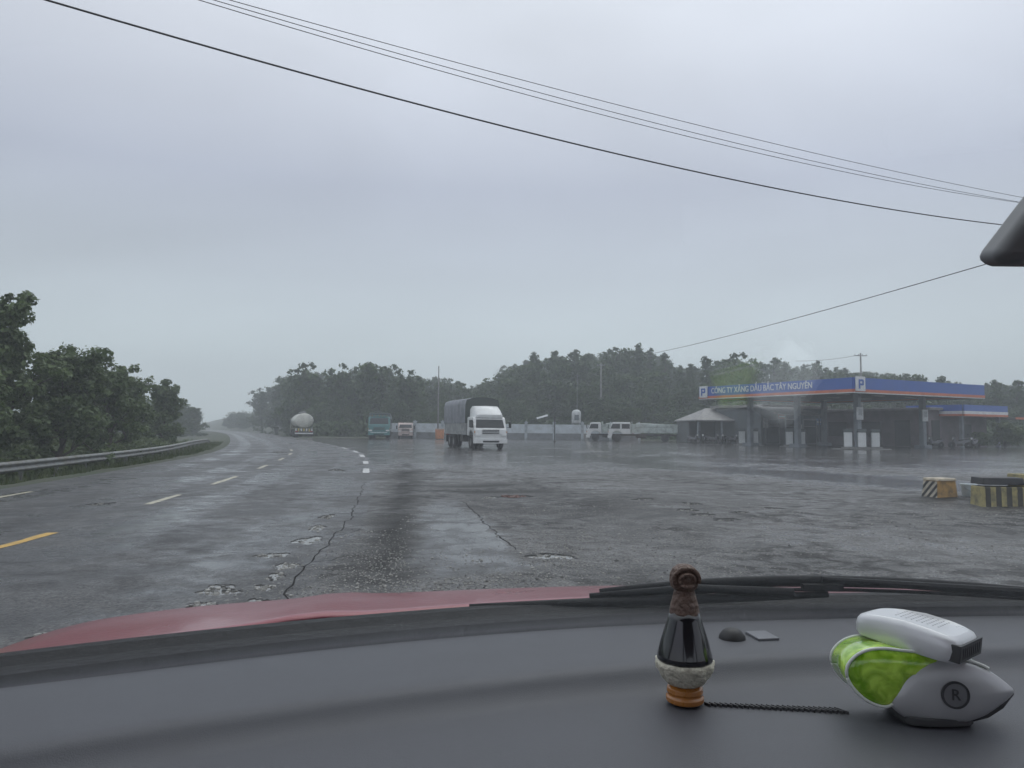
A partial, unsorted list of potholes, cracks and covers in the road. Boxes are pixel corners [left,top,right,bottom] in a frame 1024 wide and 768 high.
crack [463,502,516,550]
pothole [275,562,300,571]
crack [283,484,365,599]
pothole [291,536,323,545]
pothole [264,572,286,581]
pothole [195,584,243,596]
